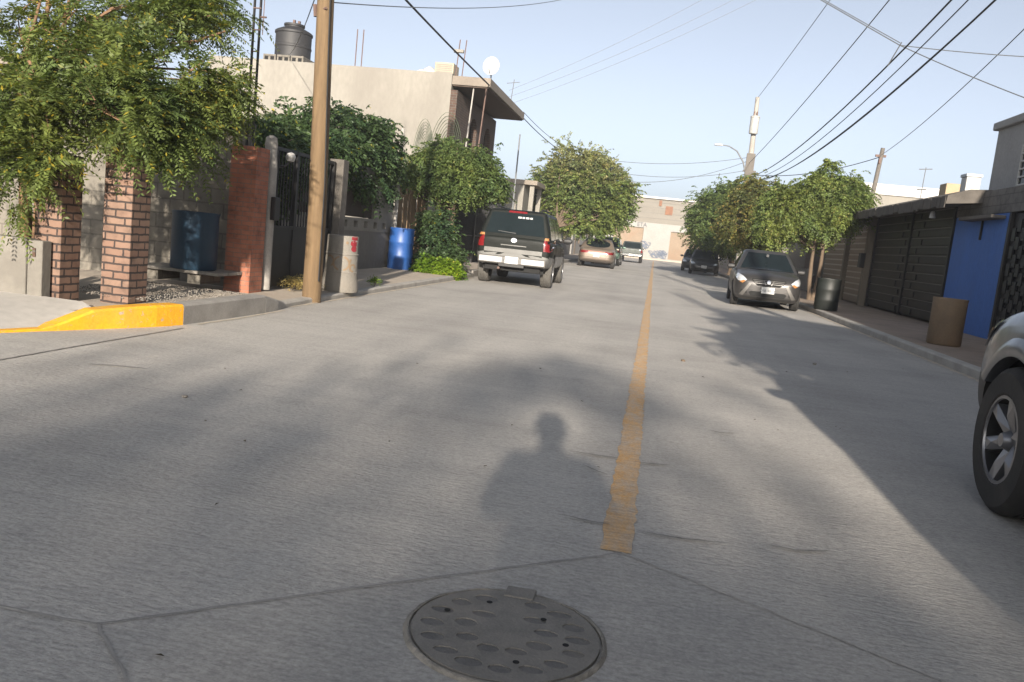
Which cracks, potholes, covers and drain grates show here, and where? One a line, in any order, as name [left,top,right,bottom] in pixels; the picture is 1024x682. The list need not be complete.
manhole cover [403,586,607,682]
crack [642,531,724,543]
crack [576,451,667,474]
